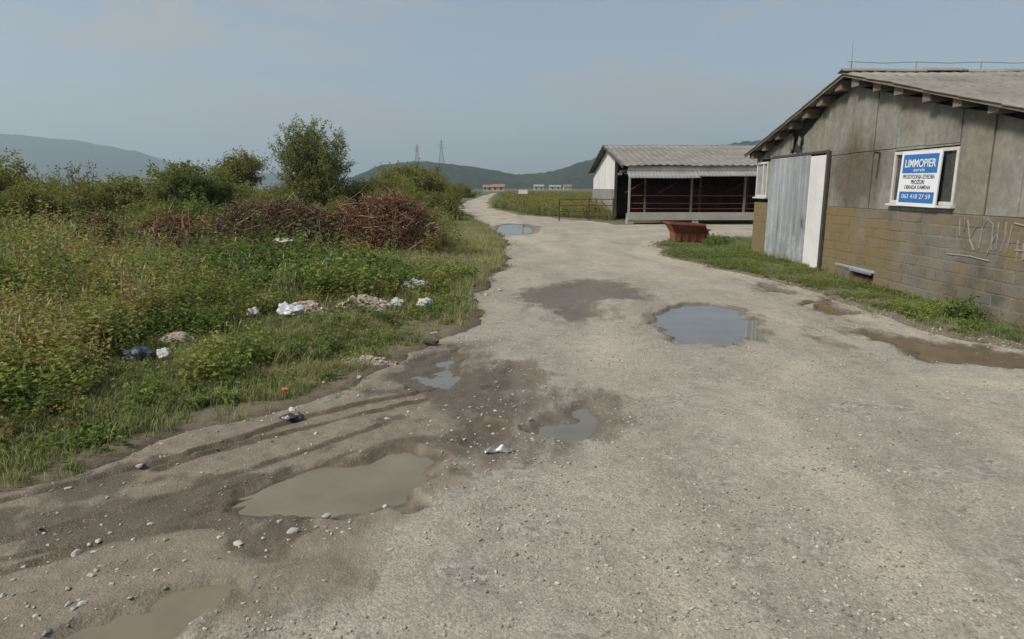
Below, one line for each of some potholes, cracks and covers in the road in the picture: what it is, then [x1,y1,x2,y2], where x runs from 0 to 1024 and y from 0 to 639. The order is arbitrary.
pothole [221,442,455,522]
pothole [797,298,864,315]
pothole [645,302,771,346]
pothole [846,329,1024,369]
pothole [39,572,254,639]
pothole [518,396,617,444]
pothole [494,224,538,235]
pothole [389,345,483,394]
